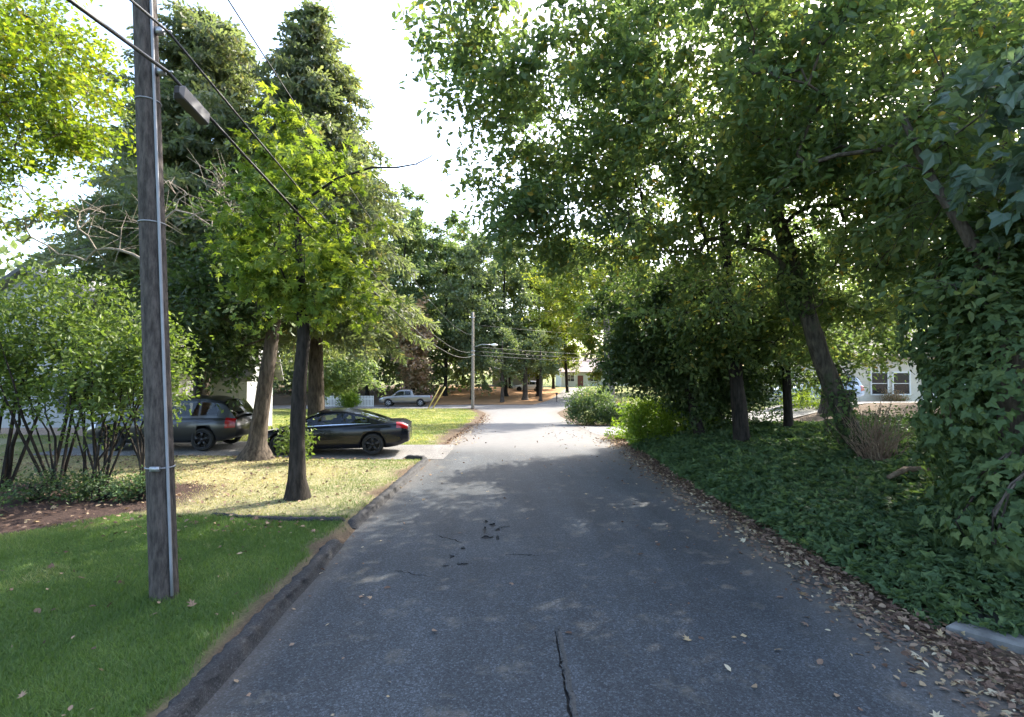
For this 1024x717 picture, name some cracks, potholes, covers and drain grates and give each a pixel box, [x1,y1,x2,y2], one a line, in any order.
crack [553,629,579,717]
crack [396,520,539,577]
